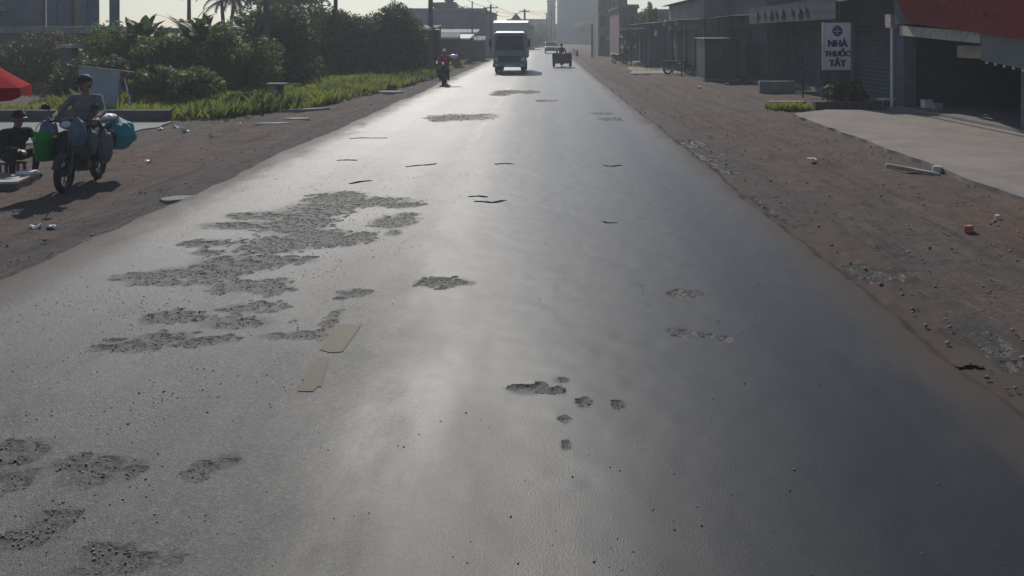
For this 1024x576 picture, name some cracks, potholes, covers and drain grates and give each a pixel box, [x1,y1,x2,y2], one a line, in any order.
pothole [105,267,214,287]
pothole [666,288,708,299]
pothole [332,288,375,301]
pothole [174,190,429,280]
pothole [424,113,500,122]
pothole [574,396,594,407]
pothole [666,328,734,343]
pothole [177,278,299,330]
pothole [0,509,86,552]
pothole [137,307,210,325]
pothole [610,400,627,409]
pothole [266,309,346,341]
